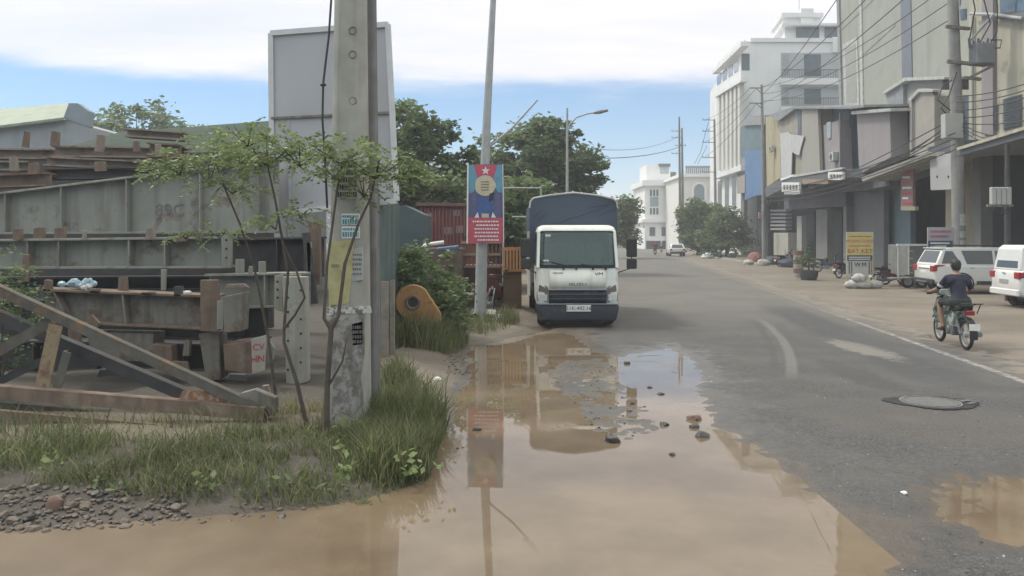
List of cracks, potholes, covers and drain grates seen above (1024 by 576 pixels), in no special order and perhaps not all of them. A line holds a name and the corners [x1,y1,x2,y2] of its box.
manhole cover [881,395,981,410]
